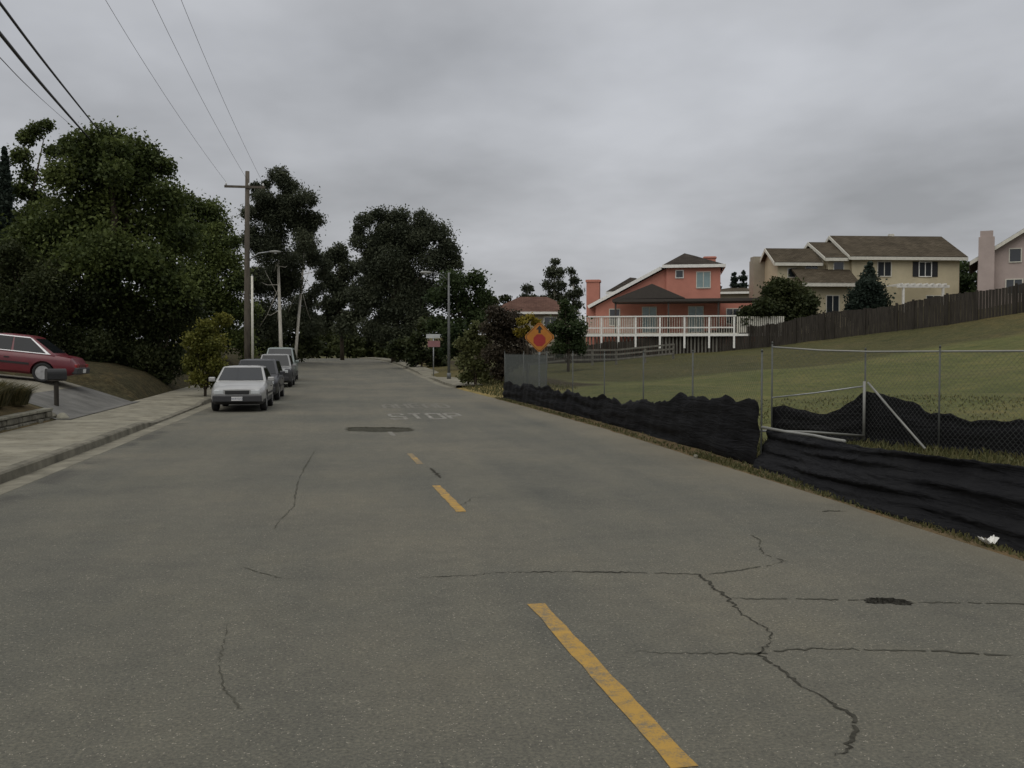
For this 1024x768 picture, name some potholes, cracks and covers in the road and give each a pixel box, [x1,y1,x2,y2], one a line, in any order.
crack [275,452,314,528]
crack [218,621,241,709]
pothole [863,597,913,606]
crack [433,535,1024,758]
